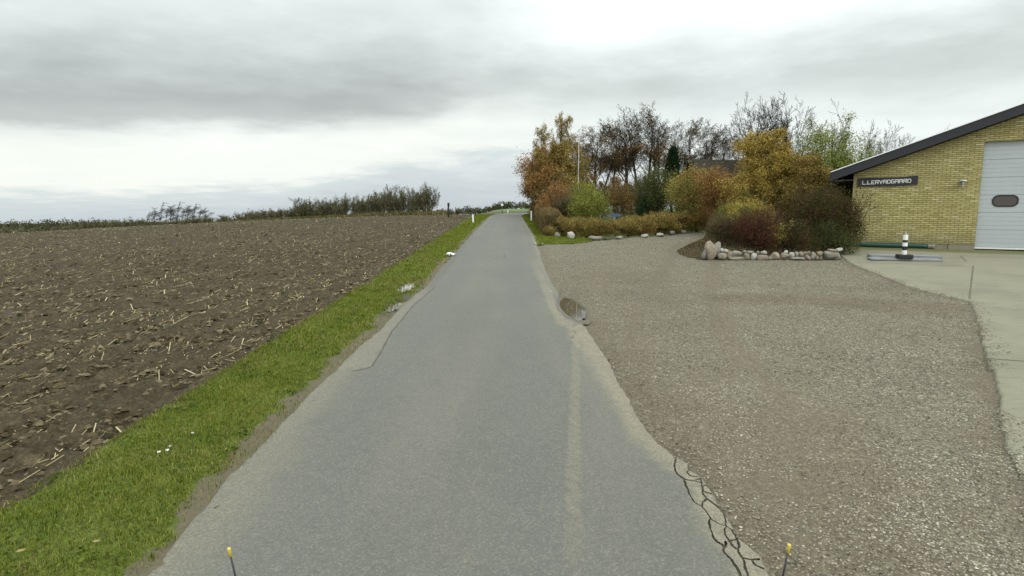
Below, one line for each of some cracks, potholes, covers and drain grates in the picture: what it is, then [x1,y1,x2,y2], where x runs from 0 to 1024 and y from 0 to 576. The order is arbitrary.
crack [674,459,763,576]
pothole [556,294,592,325]
